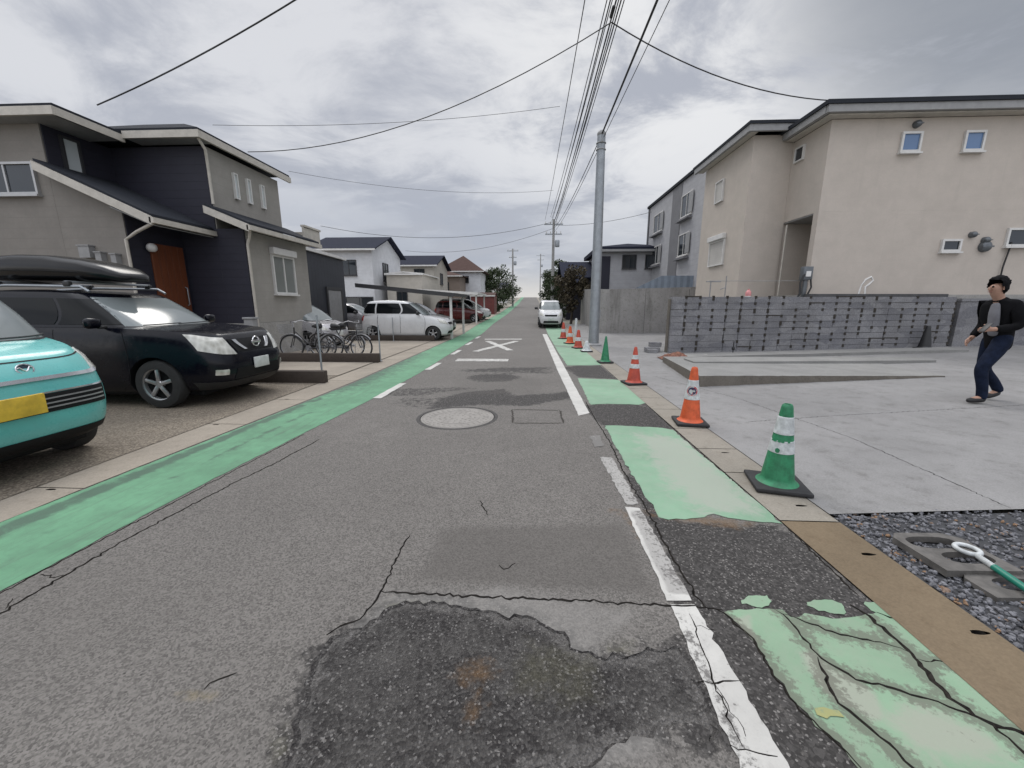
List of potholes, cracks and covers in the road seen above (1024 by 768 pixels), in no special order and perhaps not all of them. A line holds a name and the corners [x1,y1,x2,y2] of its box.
manhole cover [416,407,498,430]
crack [326,535,1024,768]
crack [0,439,319,614]
